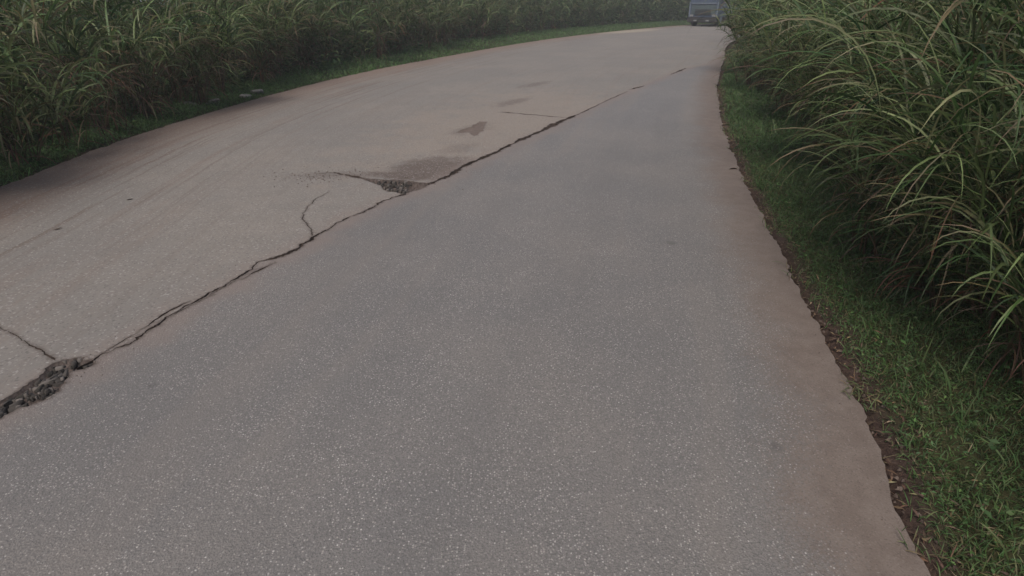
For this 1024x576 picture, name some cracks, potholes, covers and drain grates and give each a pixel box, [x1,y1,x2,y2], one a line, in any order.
pothole [361,178,431,194]
crack [76,68,686,370]
